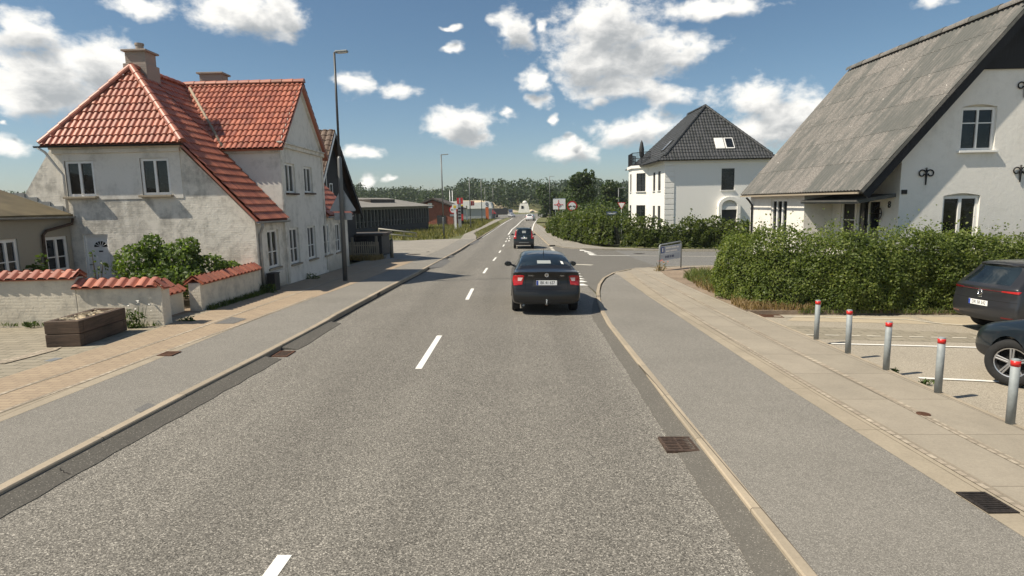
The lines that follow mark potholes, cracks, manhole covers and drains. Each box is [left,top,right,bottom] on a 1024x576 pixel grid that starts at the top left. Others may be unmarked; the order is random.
drain grate [956,492,1020,516]
drain grate [658,436,700,453]
